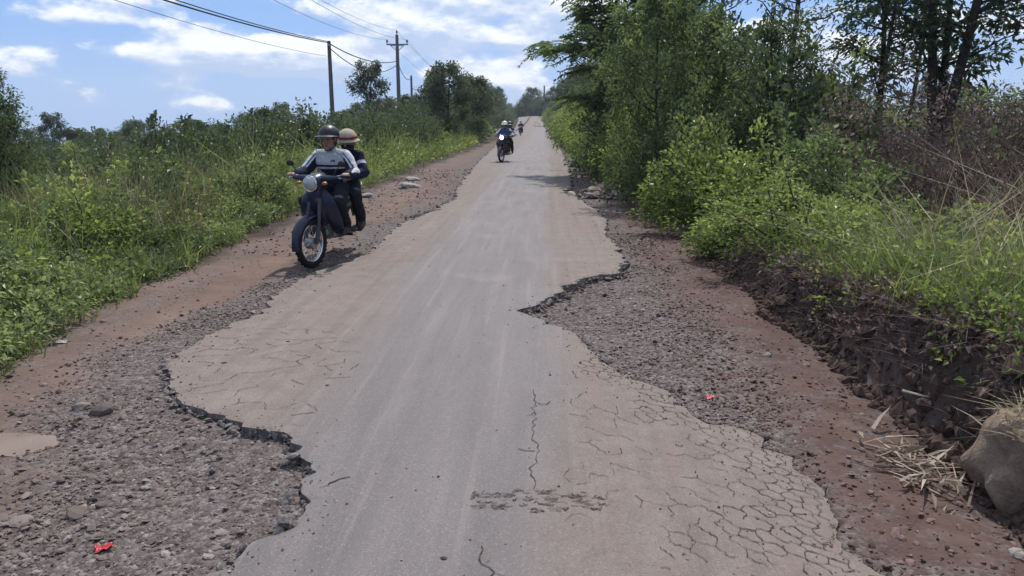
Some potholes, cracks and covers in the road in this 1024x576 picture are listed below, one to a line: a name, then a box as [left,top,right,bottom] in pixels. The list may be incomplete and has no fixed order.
crack [191,326,358,425]
pothole [14,363,314,576]
pothole [526,263,675,366]
crack [487,355,875,576]
